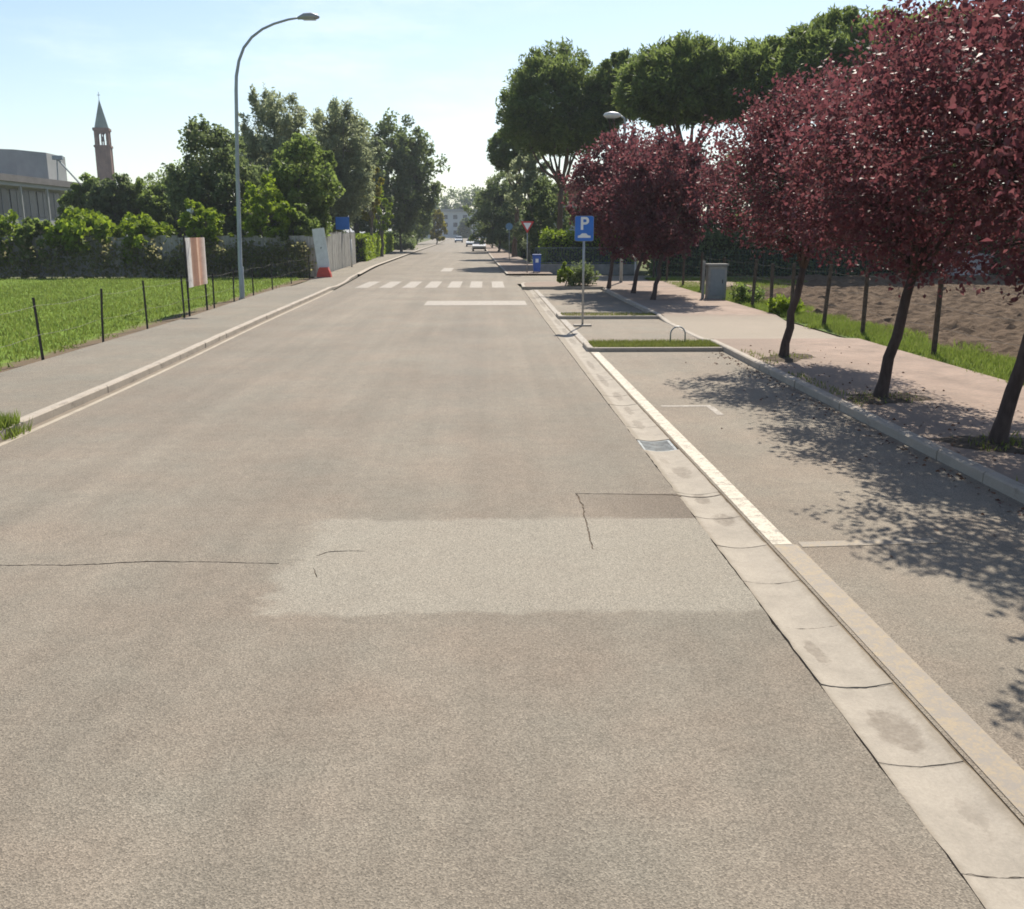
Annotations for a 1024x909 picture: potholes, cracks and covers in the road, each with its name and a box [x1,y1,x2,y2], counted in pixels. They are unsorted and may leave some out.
drain grate [637,440,678,451]
crack [576,494,721,549]
